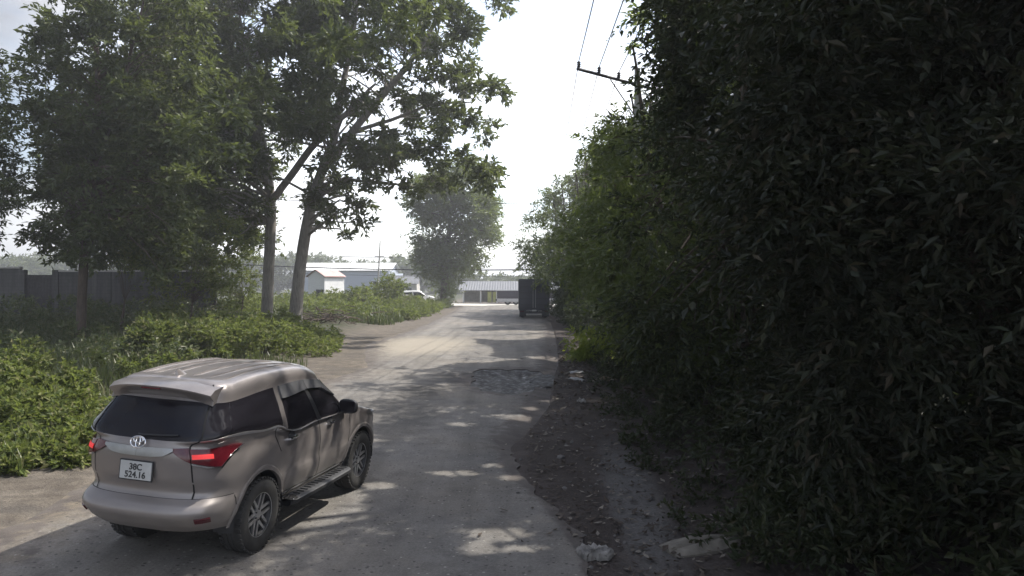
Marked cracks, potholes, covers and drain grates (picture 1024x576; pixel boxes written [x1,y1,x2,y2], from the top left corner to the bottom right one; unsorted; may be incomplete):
pothole [470,369,555,395]
